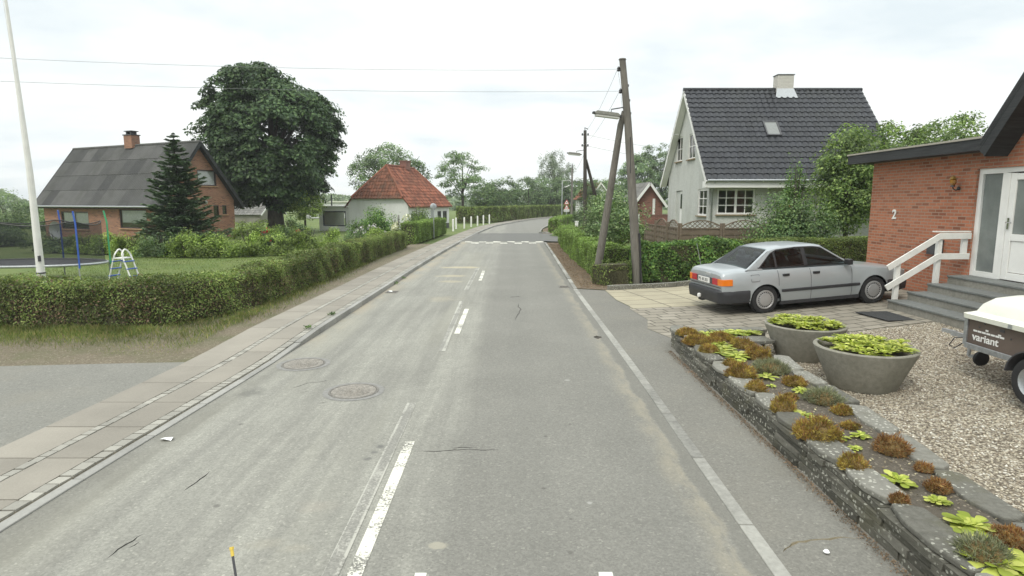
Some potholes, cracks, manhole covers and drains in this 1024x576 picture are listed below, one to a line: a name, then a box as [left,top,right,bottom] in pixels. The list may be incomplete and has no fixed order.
manhole cover [276,357,330,371]
manhole cover [322,382,385,401]
crack [783,537,859,552]
